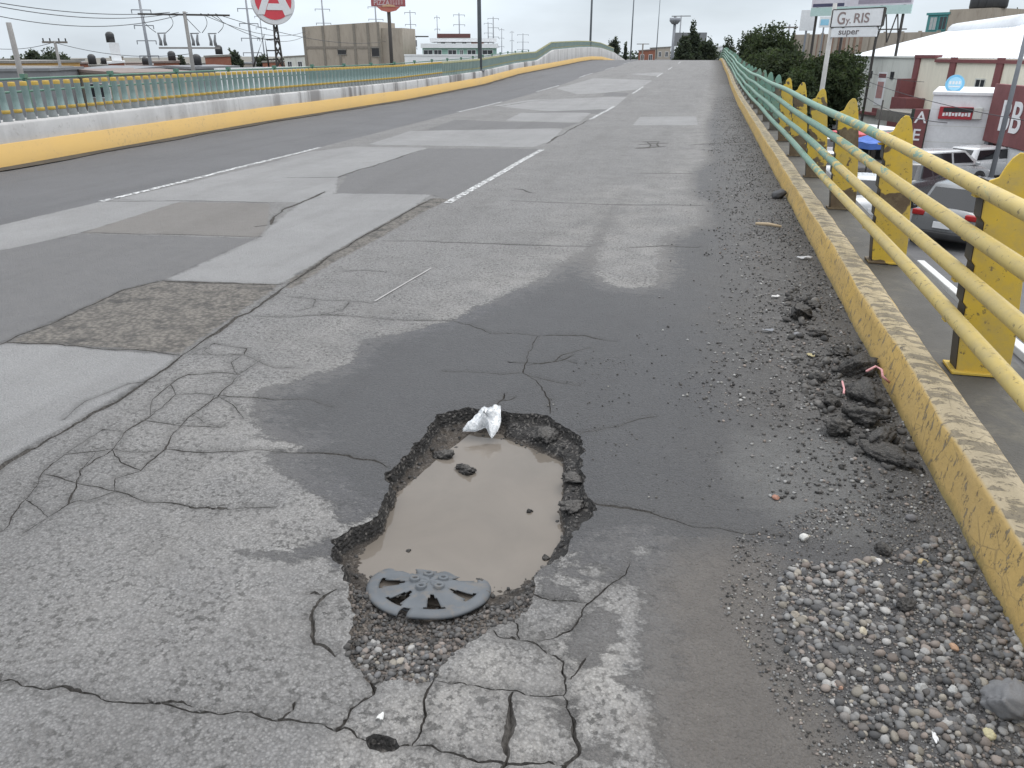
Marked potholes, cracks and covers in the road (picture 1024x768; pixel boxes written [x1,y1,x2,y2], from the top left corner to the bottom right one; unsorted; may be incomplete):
crack [4,343,386,532]
crack [400,566,629,768]
crack [593,502,784,536]
crack [309,590,336,657]
crack [0,679,377,741]
crack [264,297,615,413]
pothole [330,407,597,688]
